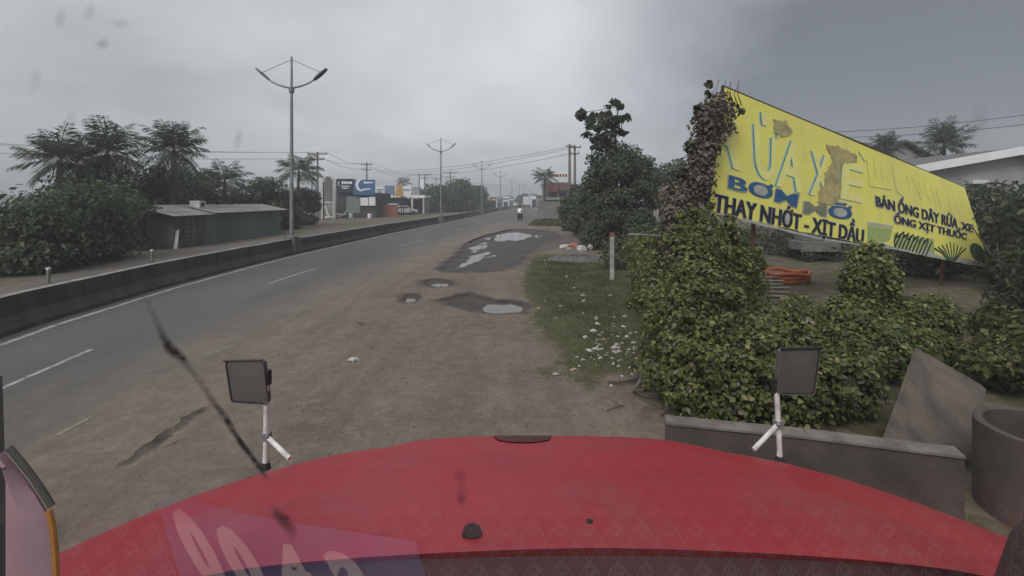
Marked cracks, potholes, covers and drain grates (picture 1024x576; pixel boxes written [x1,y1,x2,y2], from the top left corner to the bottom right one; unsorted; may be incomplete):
pothole [436,229,559,273]
pothole [423,279,453,287]
pothole [402,294,419,302]
pothole [440,294,529,314]
